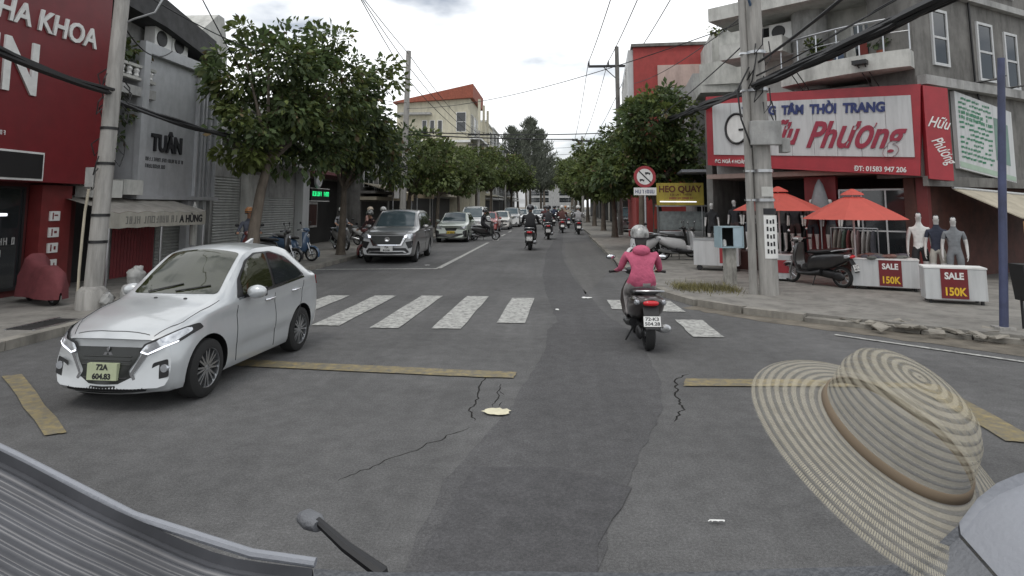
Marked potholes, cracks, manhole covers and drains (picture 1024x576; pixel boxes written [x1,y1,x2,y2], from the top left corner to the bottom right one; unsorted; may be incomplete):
crack [468,378,504,421]
crack [673,374,688,422]
